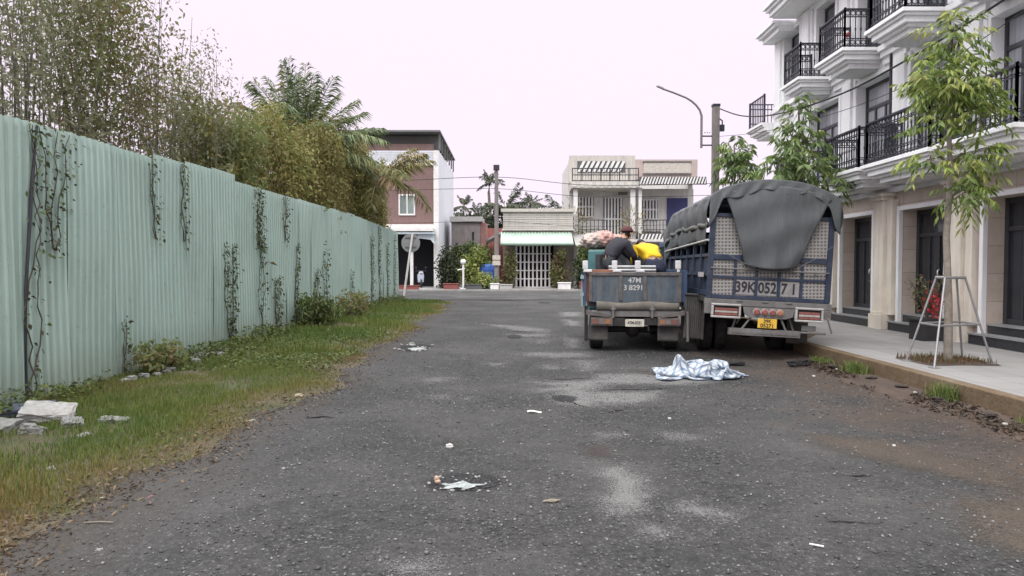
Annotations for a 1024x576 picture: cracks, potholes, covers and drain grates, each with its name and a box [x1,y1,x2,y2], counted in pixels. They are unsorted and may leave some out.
pothole [393,342,434,352]
pothole [424,470,512,492]
